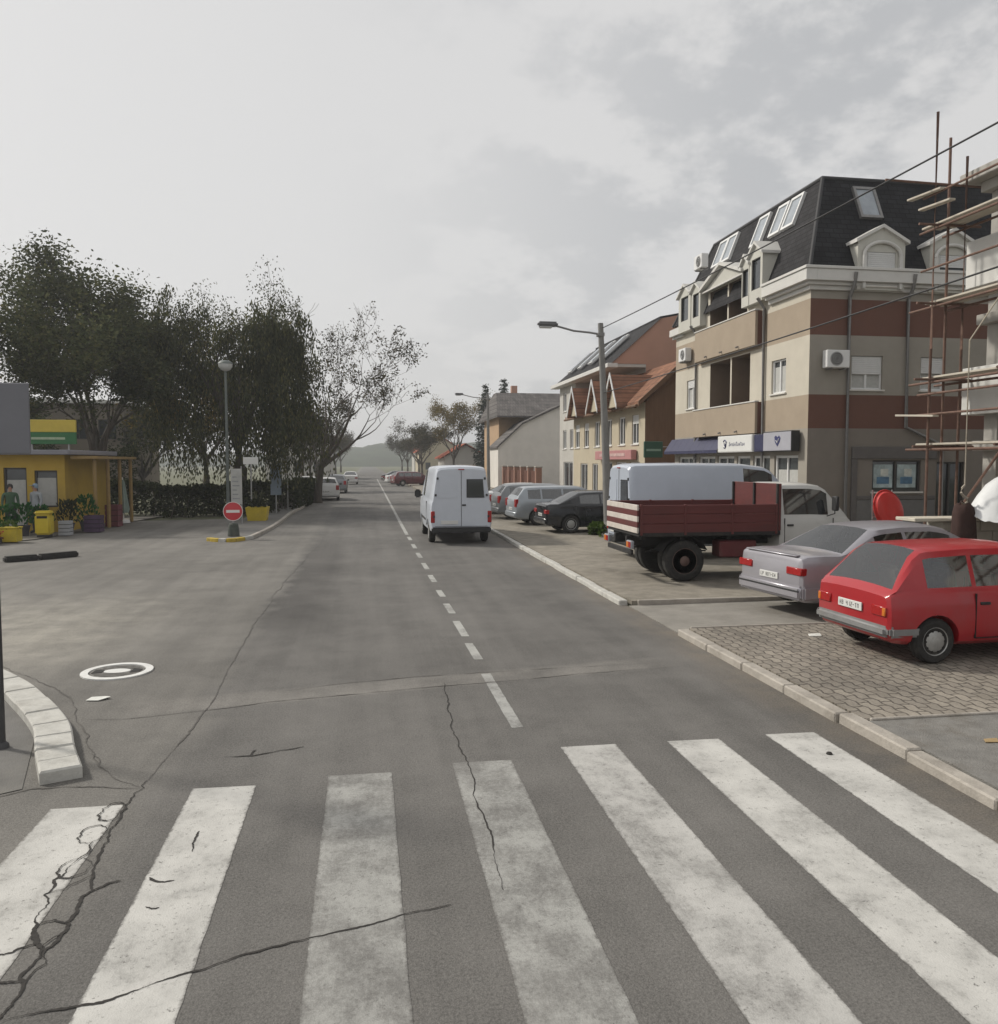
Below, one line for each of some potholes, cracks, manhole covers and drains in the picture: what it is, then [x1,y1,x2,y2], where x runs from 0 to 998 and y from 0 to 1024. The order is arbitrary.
crack [83,662,662,889]
manhole cover [80,662,154,681]
crack [0,666,451,1020]
